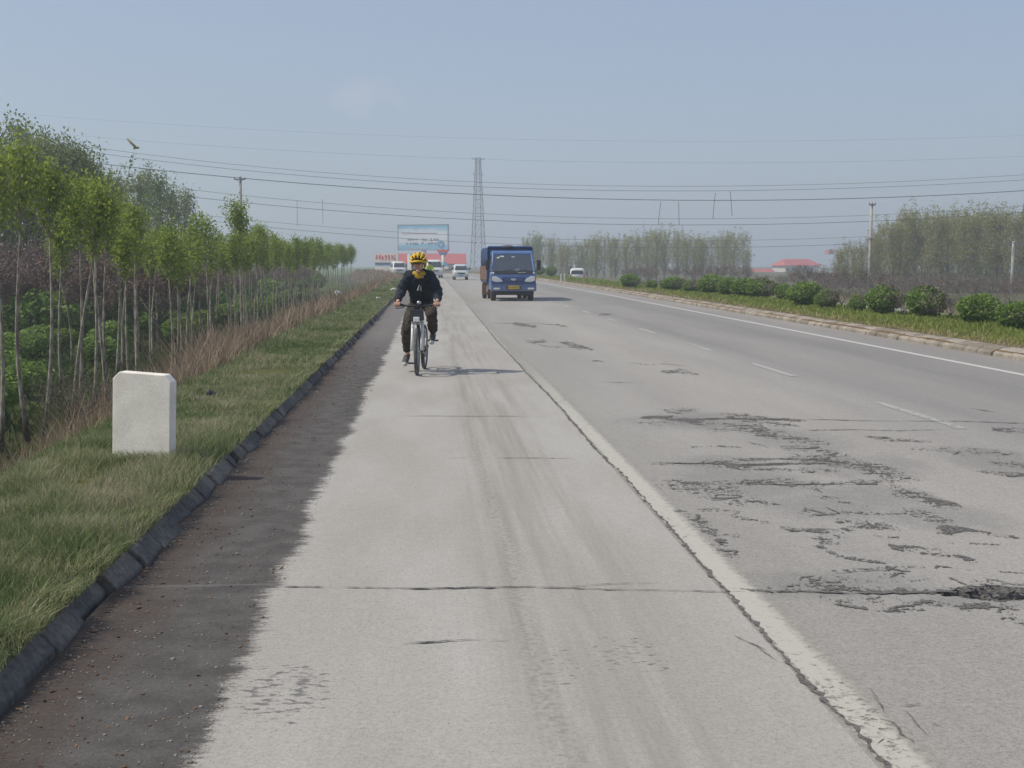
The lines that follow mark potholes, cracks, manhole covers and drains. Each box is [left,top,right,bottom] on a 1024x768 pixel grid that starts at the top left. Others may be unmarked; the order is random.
crack [466,304,1024,768]
